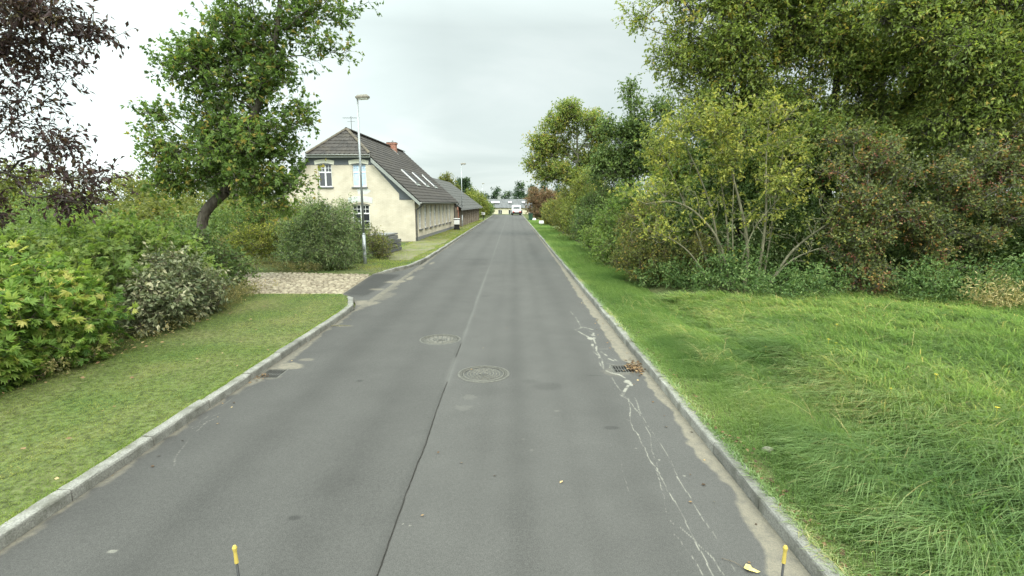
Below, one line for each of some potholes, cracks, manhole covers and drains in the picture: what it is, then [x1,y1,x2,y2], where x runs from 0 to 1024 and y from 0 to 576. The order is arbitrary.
drain grate [609,365,639,373]
manhole cover [457,365,510,383]
manhole cover [419,334,461,345]
drain grate [257,369,289,378]
